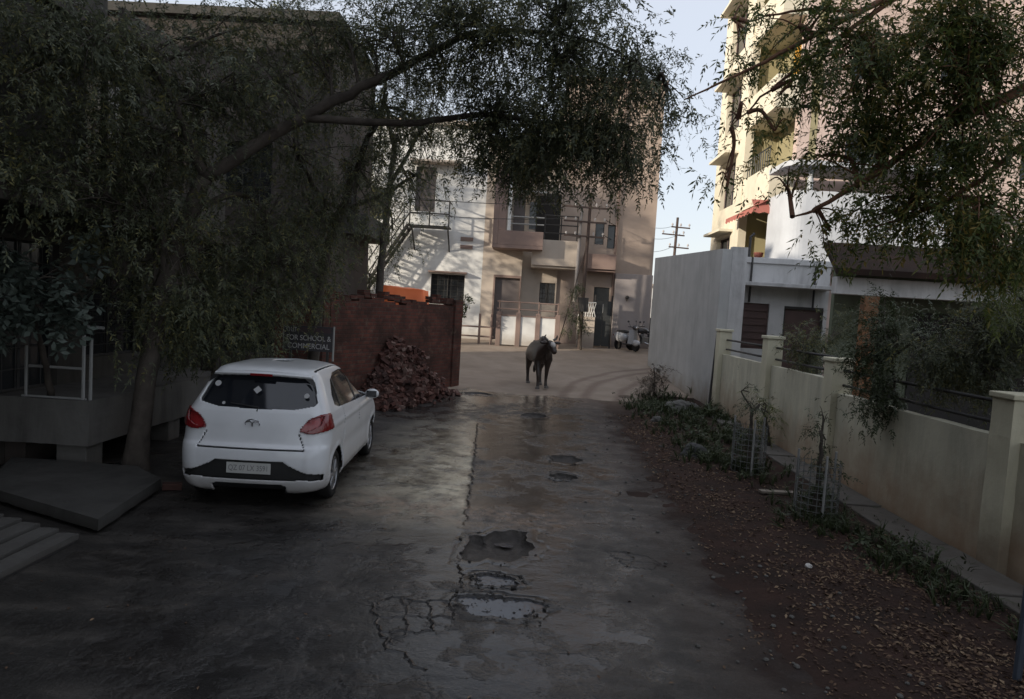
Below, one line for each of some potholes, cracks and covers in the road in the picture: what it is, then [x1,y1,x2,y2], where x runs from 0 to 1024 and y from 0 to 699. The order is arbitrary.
crack [369,423,479,670]
pothole [440,589,566,625]
pothole [468,571,527,590]
pothole [450,526,548,568]
pothole [543,471,582,482]
pothole [546,454,589,465]
